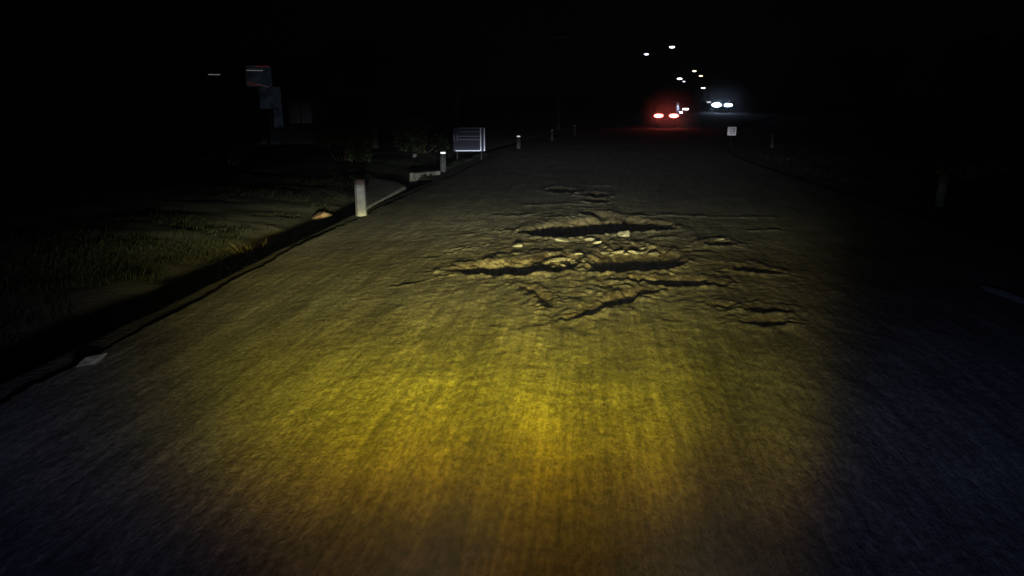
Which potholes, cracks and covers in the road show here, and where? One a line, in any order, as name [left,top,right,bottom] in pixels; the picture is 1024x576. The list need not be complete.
pothole [514,216,681,238]
pothole [584,243,690,273]
pothole [579,191,611,199]
pothole [447,251,583,276]
pothole [578,208,650,221]
